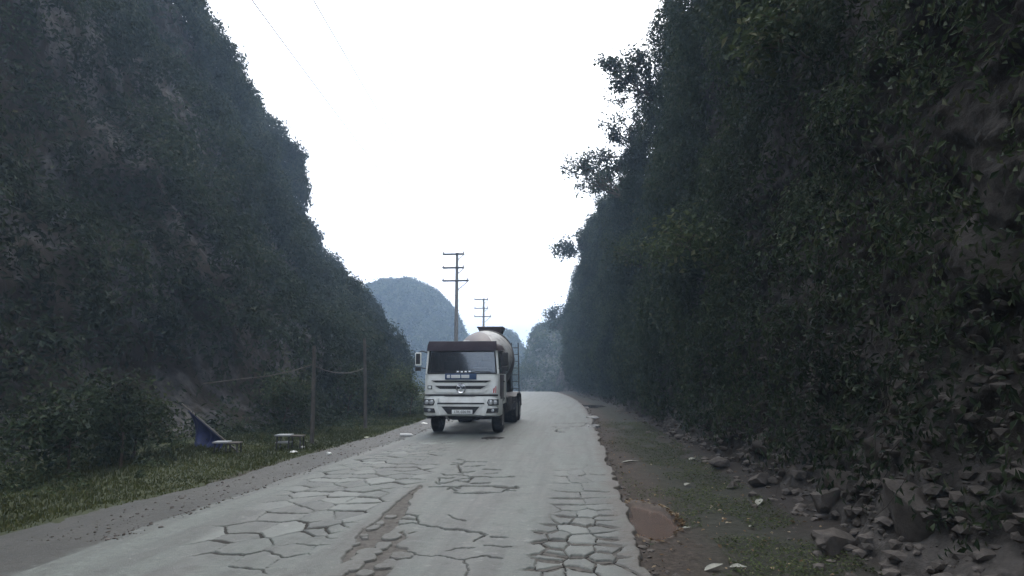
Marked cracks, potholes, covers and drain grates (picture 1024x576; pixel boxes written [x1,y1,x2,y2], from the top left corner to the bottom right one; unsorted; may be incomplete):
crack [208,443,517,576]
crack [525,476,637,576]
